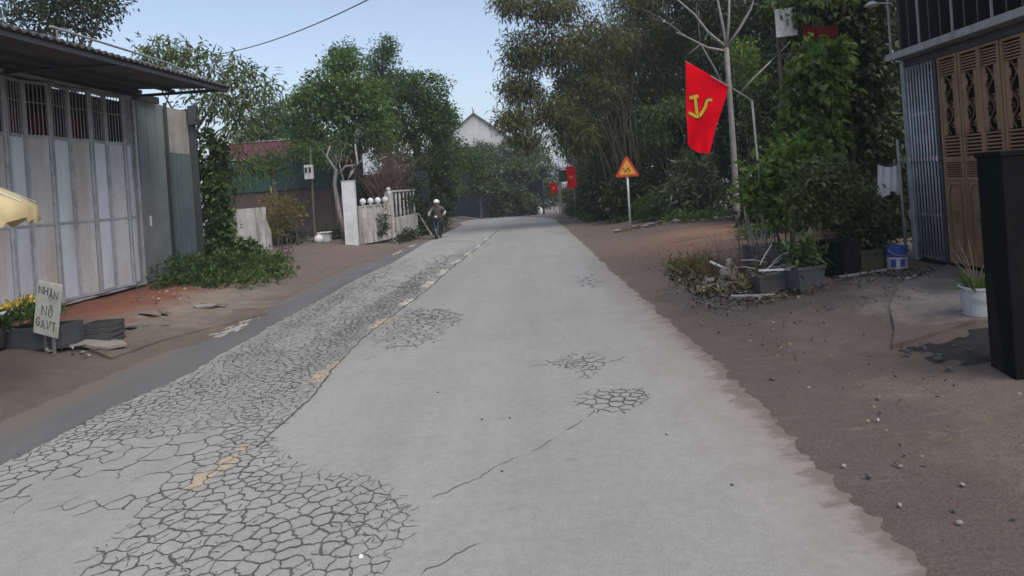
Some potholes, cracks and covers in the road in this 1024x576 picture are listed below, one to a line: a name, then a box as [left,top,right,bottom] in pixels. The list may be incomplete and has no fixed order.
crack [533,352,649,451]
crack [1,230,498,576]
